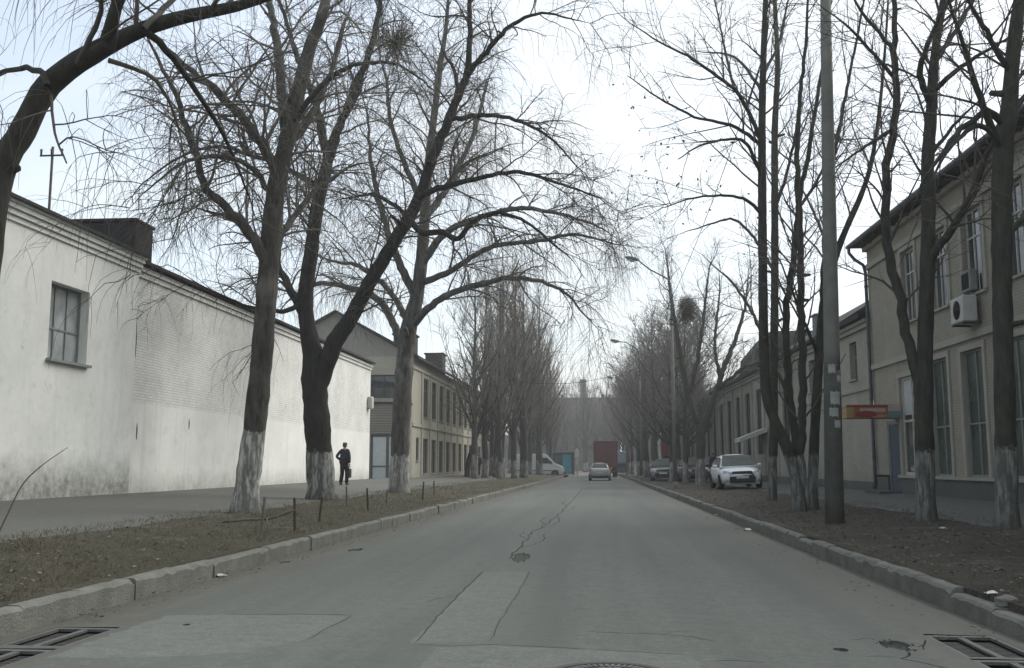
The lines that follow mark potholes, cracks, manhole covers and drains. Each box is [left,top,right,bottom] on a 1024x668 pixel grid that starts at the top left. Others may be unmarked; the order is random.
crack [509,490,581,559]
drain grate [925,635,1024,661]
pothole [512,552,530,563]
drain grate [0,627,116,650]
drain grate [973,660,1024,668]
pothole [873,639,917,651]
drain grate [0,649,52,668]
